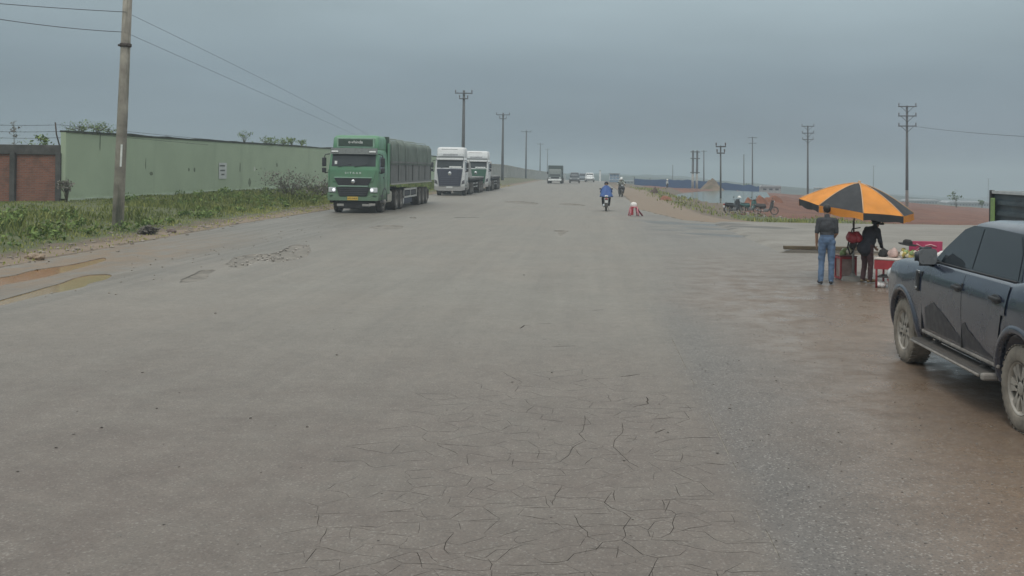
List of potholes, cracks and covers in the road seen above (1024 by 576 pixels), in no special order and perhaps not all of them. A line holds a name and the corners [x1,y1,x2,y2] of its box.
pothole [224,244,311,269]
pothole [180,270,215,283]
crack [269,369,769,576]
